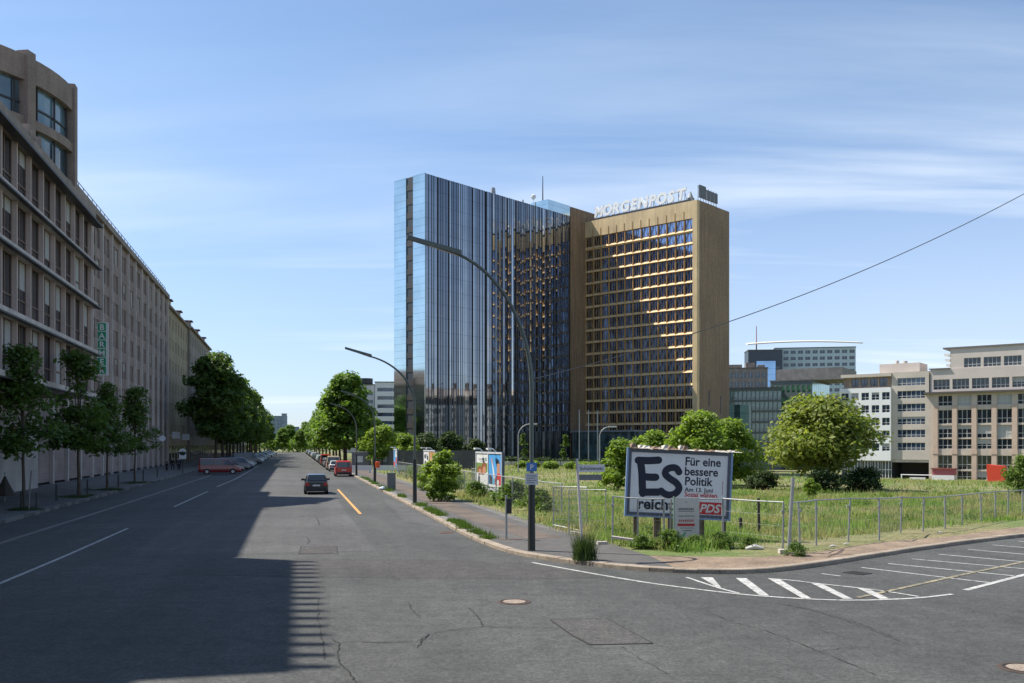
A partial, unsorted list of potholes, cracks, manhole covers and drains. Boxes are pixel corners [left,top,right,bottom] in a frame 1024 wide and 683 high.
manhole cover [997,662,1024,674]
crack [316,593,557,683]
